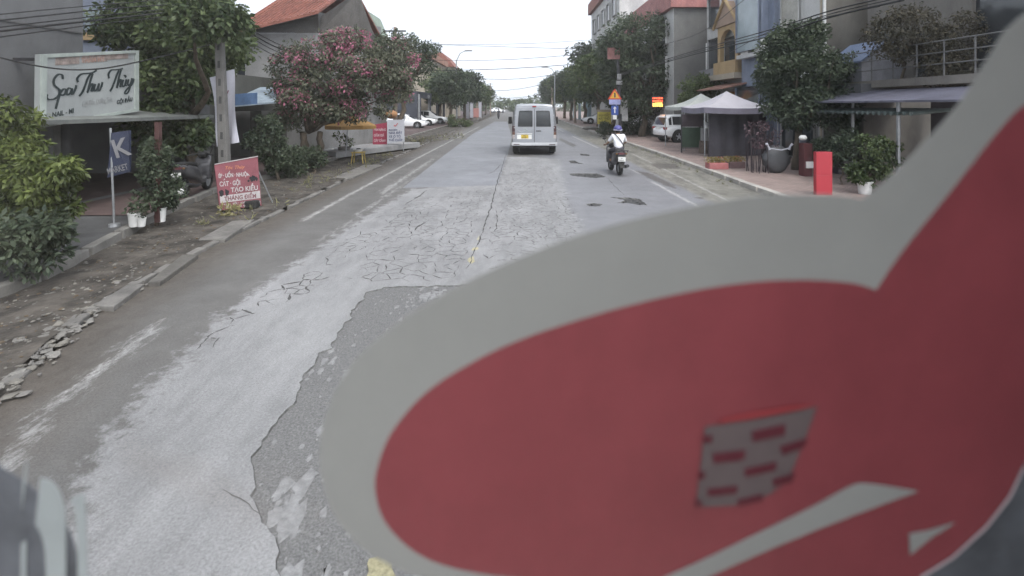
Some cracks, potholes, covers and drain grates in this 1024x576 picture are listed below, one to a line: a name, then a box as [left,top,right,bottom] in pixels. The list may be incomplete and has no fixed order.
crack [197,153,576,349]
pothole [611,197,646,205]
